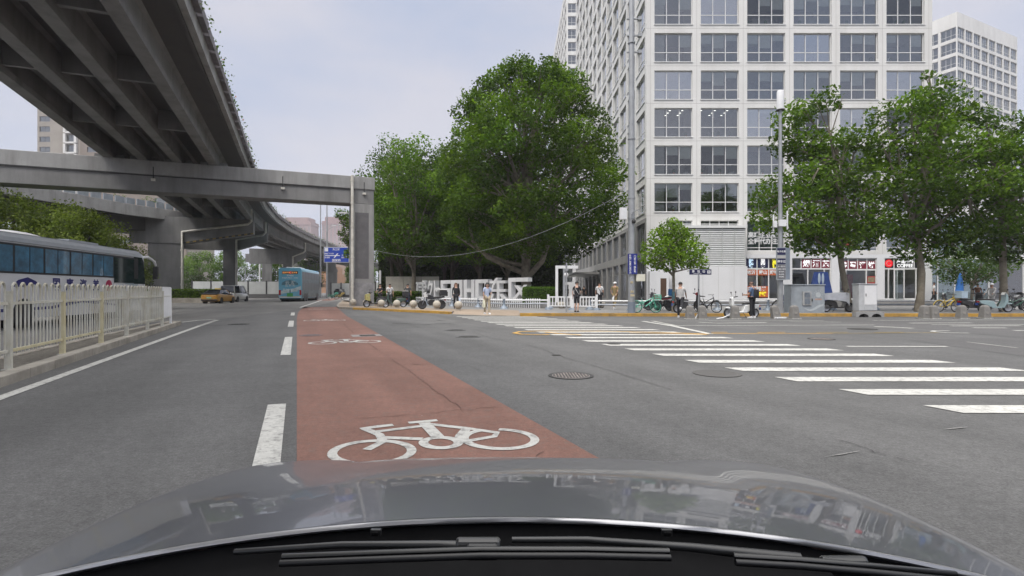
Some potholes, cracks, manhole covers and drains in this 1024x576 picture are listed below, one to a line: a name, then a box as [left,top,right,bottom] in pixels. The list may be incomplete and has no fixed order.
manhole cover [548,372,594,380]
crack [367,344,499,418]
